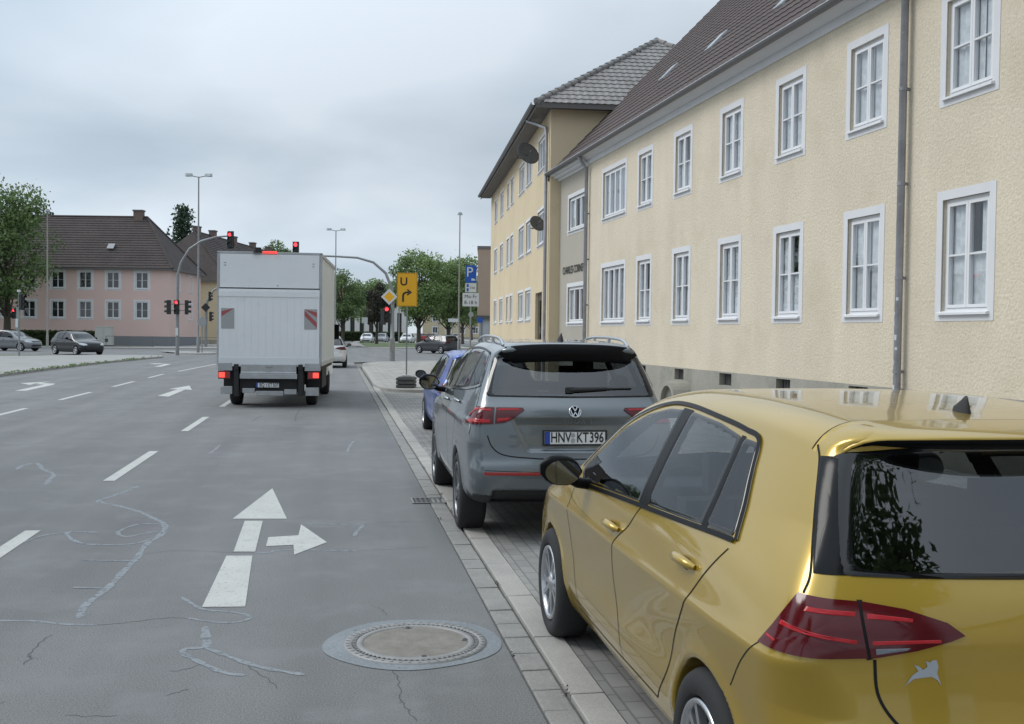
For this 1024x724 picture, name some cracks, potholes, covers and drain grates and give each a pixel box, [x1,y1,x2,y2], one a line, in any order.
manhole cover [322,619,502,670]
crack [0,617,175,665]
crack [392,671,417,721]
